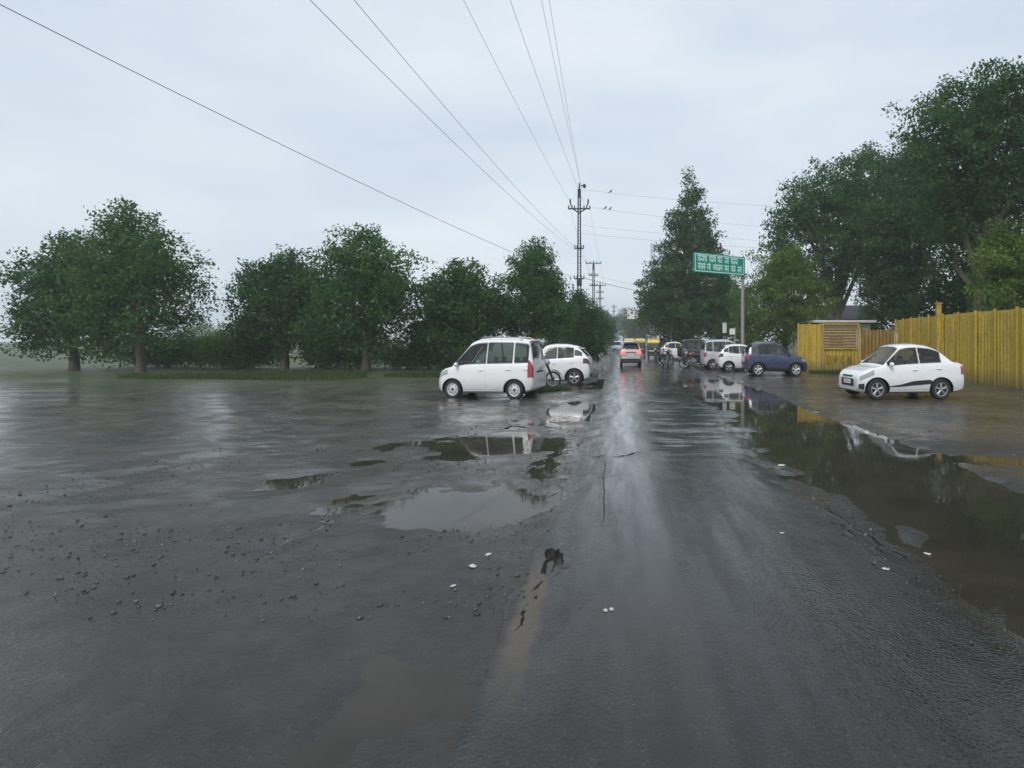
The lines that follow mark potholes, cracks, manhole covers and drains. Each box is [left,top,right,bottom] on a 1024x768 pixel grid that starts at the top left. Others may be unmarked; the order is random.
crack [813,504,919,566]
crack [587,451,644,527]
pothole [534,546,571,582]
